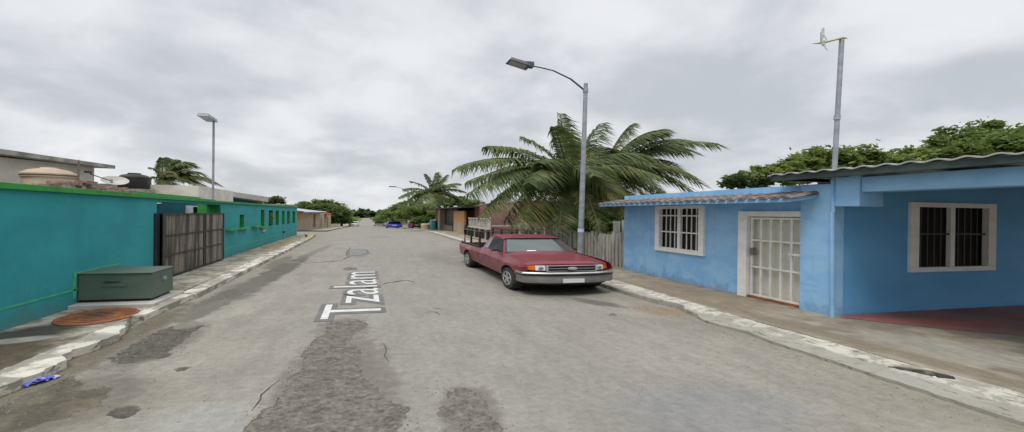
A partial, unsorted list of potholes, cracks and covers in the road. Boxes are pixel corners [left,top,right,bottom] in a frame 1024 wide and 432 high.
manhole cover [51,307,140,327]
